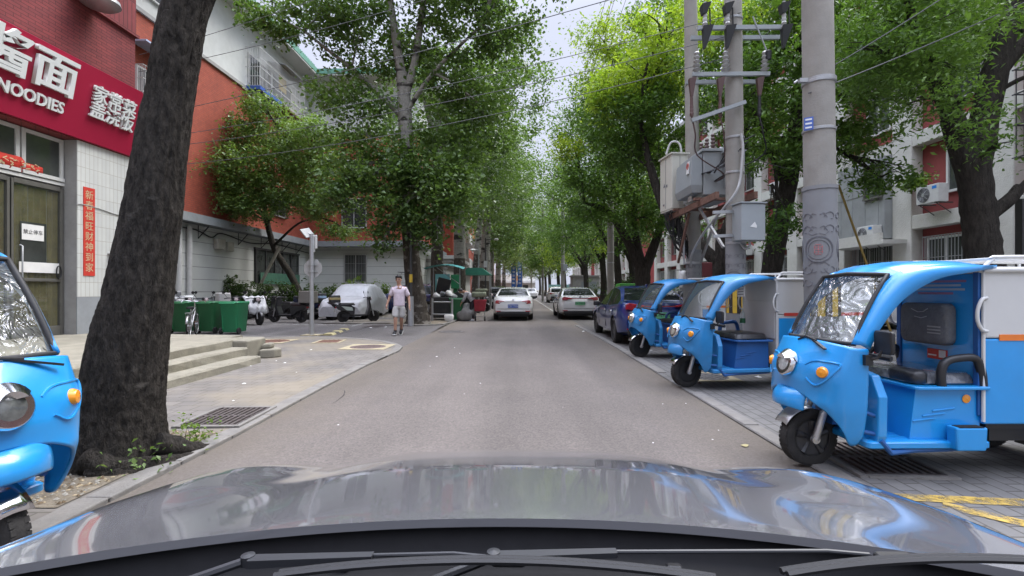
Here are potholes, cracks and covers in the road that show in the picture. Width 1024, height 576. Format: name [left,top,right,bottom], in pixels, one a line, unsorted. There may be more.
drain grate [828,440,962,480]
drain grate [171,406,277,429]
